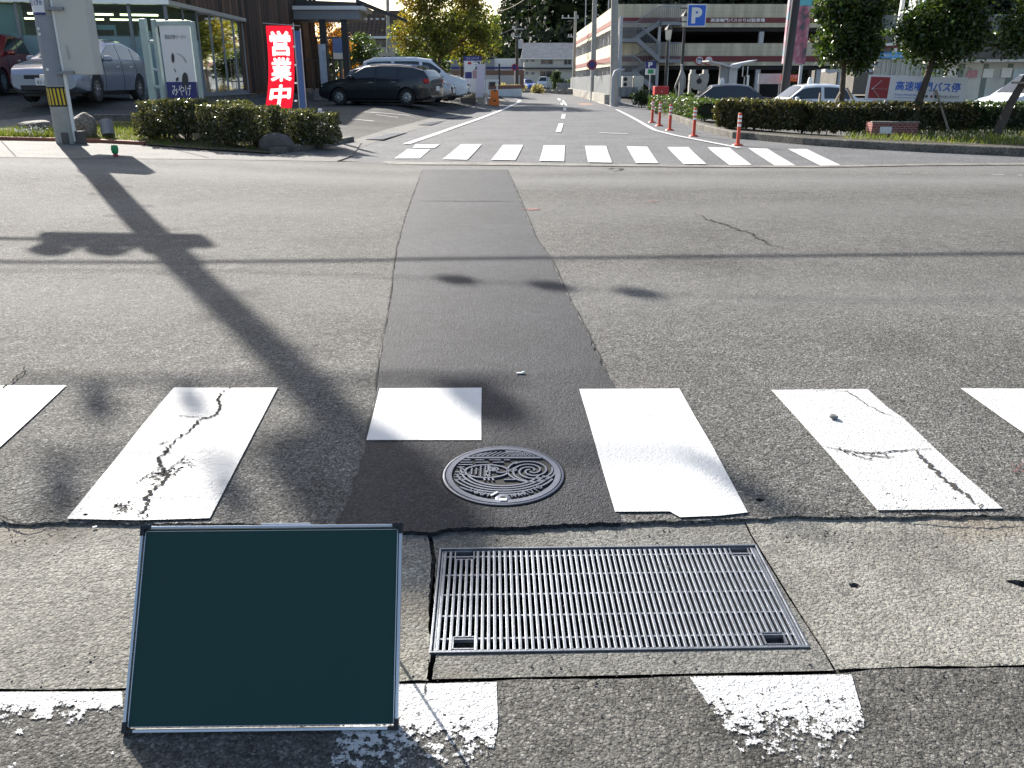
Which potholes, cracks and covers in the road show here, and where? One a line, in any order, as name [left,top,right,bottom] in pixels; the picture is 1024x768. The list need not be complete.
crack [81,386,232,521]
manhole cover [441,446,566,507]
drain grate [429,544,810,655]
crack [823,446,1022,519]
crack [693,212,793,249]
